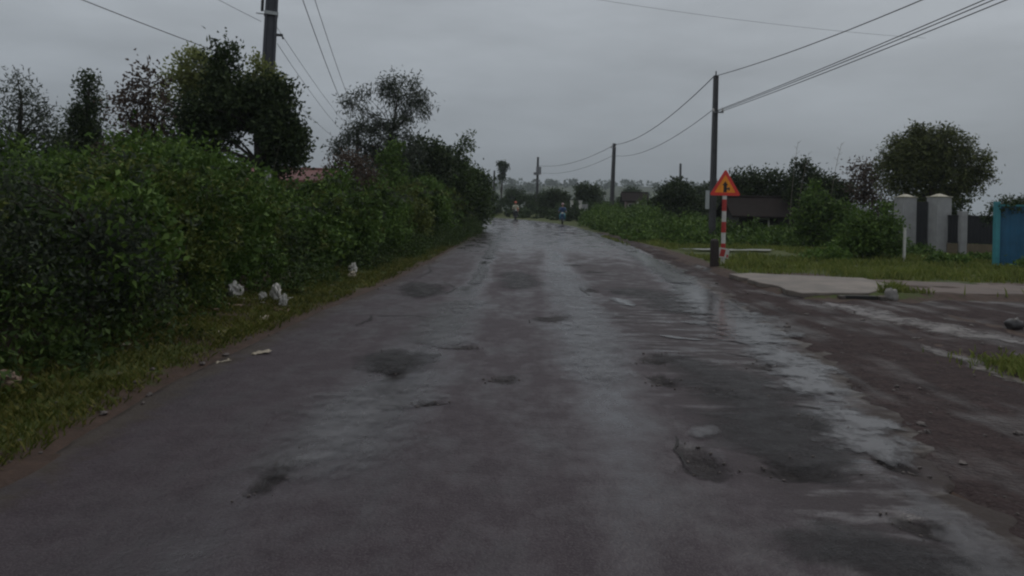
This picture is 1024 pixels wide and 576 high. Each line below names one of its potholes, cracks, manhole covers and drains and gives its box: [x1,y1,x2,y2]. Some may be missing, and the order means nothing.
pothole [684,449,723,481]
pothole [648,376,674,387]
pothole [641,355,675,365]
pothole [252,460,292,493]
